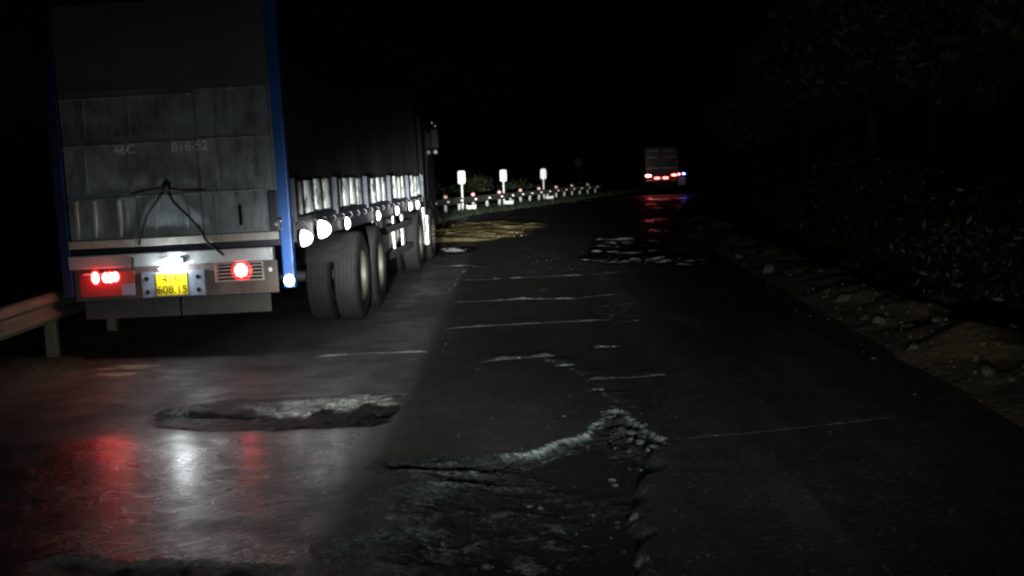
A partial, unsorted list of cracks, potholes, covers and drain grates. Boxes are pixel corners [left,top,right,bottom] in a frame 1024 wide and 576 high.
pothole [148,394,406,432]
crack [428,264,643,332]
pothole [304,407,670,576]
pothole [574,237,714,267]
crack [468,351,901,440]
crack [314,347,431,357]
pothole [435,245,480,255]
